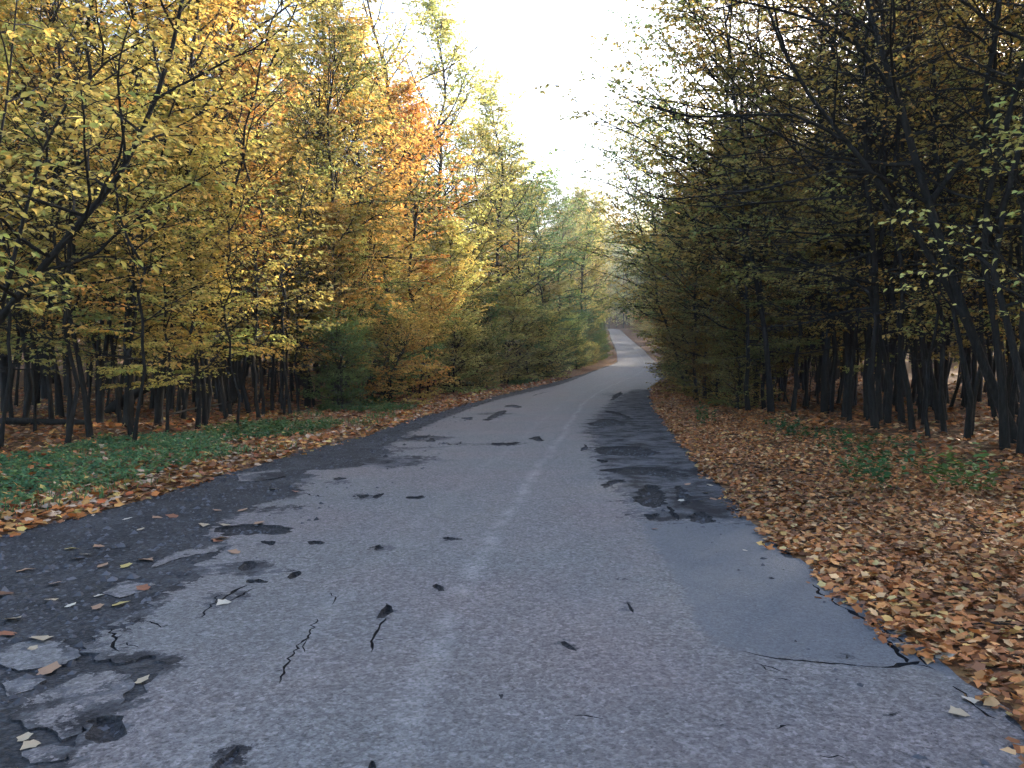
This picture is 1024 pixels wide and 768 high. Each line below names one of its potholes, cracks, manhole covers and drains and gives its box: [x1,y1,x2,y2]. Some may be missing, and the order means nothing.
pothole [214,524,293,536]
pothole [84,715,127,744]
crack [108,585,254,652]
